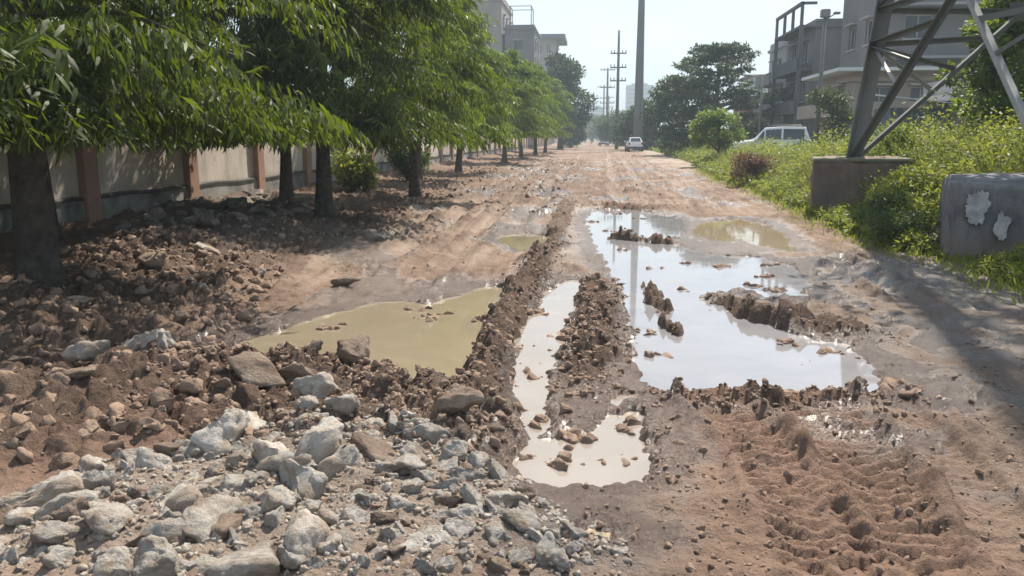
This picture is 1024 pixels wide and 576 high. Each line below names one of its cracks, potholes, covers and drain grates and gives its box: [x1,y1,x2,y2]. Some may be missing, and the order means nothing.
pothole [505,399,662,486]
pothole [496,227,557,250]
pothole [582,205,888,390]
pothole [229,277,510,371]
pothole [496,278,588,431]
